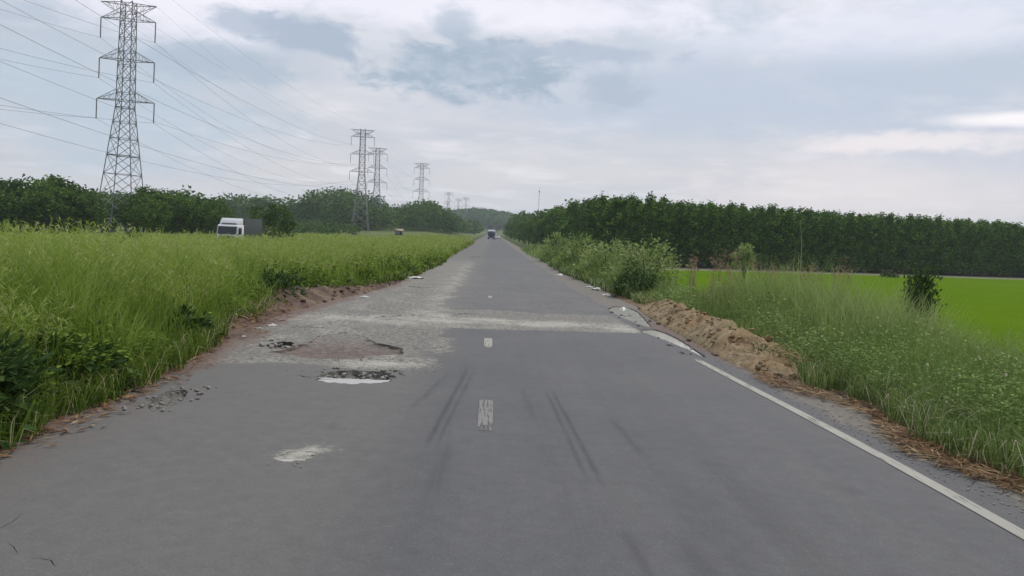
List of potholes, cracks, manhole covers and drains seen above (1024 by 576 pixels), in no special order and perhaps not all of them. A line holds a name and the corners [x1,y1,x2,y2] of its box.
pothole [259,338,296,349]
pothole [271,332,404,360]
pothole [315,367,404,384]
pothole [122,386,217,412]
